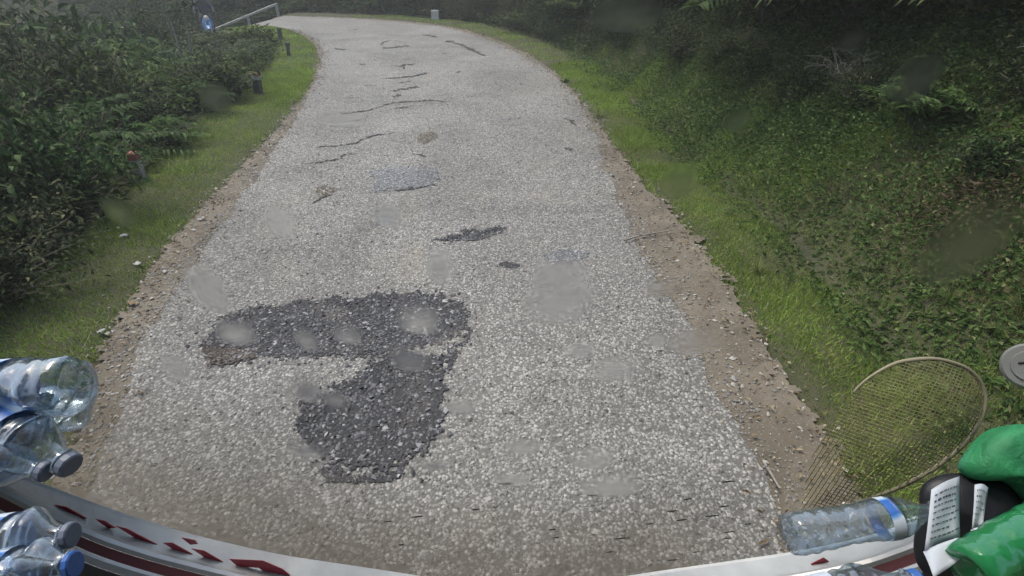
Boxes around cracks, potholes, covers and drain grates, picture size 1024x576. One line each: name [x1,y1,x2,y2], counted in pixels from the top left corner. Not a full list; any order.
crack [431,35,485,73]
crack [301,40,444,164]
